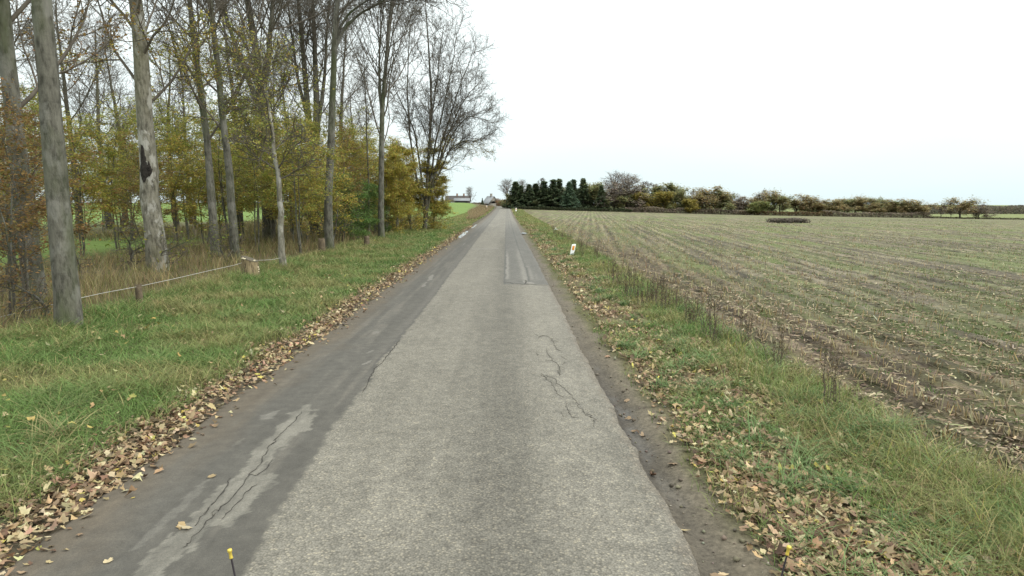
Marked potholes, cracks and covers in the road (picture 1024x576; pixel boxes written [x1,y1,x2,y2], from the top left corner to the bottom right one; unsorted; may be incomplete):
crack [536,335,597,421]
crack [184,411,302,547]
